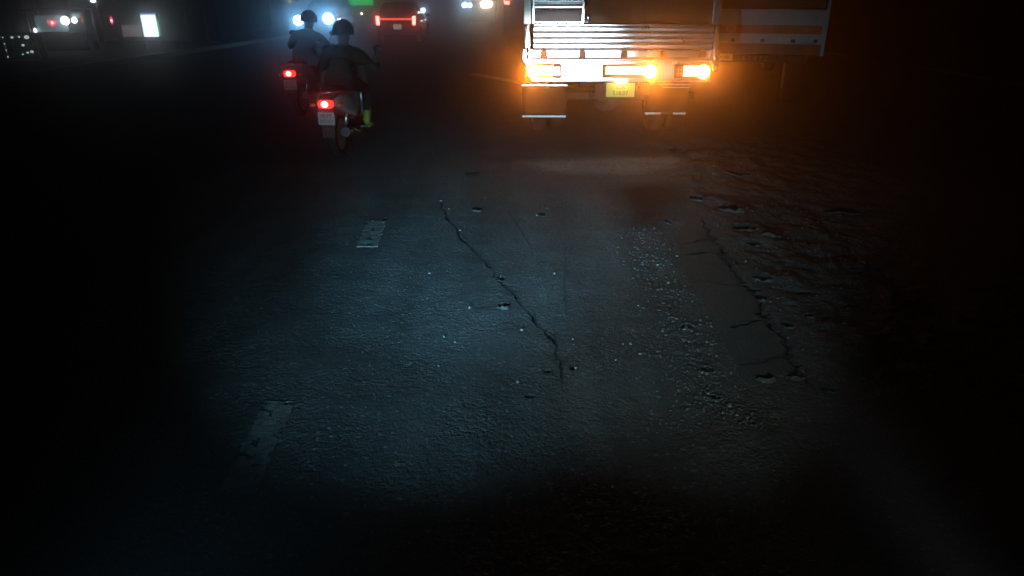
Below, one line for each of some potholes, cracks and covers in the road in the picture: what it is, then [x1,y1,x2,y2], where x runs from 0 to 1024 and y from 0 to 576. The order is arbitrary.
pothole [820,206,866,215]
pothole [716,203,750,213]
pothole [730,222,760,232]
crack [729,318,769,328]
pothole [785,373,807,381]
crack [739,355,794,365]
crack [438,197,567,384]
crack [678,237,747,264]
pothole [755,373,776,384]
